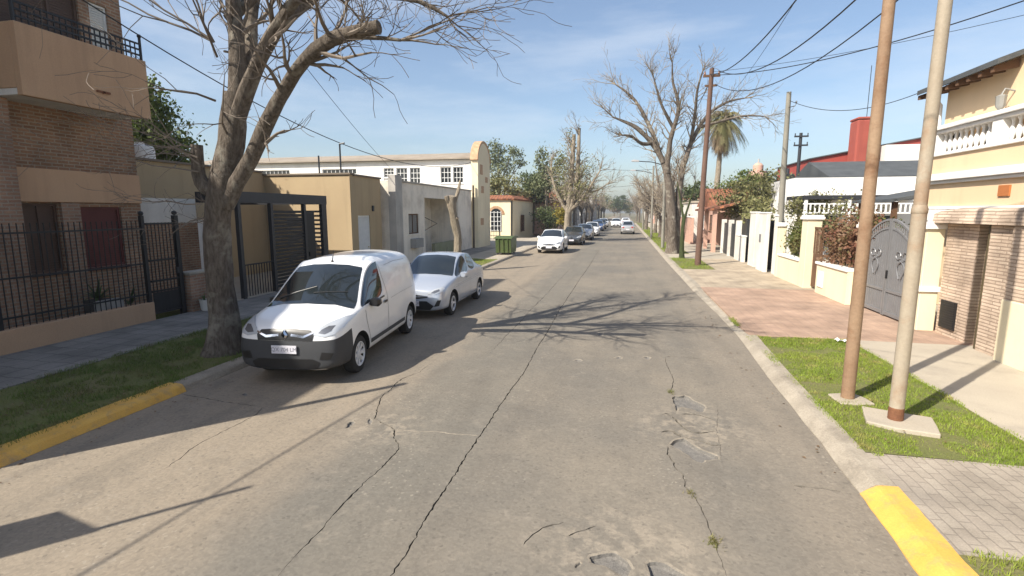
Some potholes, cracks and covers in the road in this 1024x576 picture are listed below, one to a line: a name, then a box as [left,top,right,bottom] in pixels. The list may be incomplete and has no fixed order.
pothole [671,394,707,413]
pothole [586,550,635,576]
pothole [644,560,689,576]
pothole [668,437,720,464]
crack [662,404,727,576]
crack [162,394,262,470]
crack [524,522,595,544]
crack [278,366,477,576]
